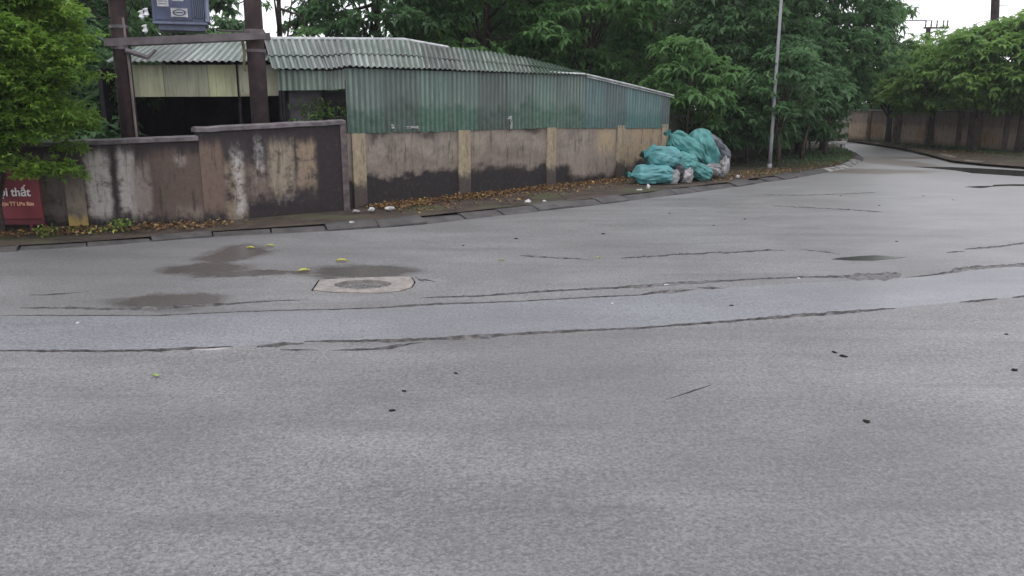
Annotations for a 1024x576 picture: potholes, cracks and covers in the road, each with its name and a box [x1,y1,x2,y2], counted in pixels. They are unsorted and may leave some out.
manhole cover [313,276,415,294]
crack [0,242,1024,352]
